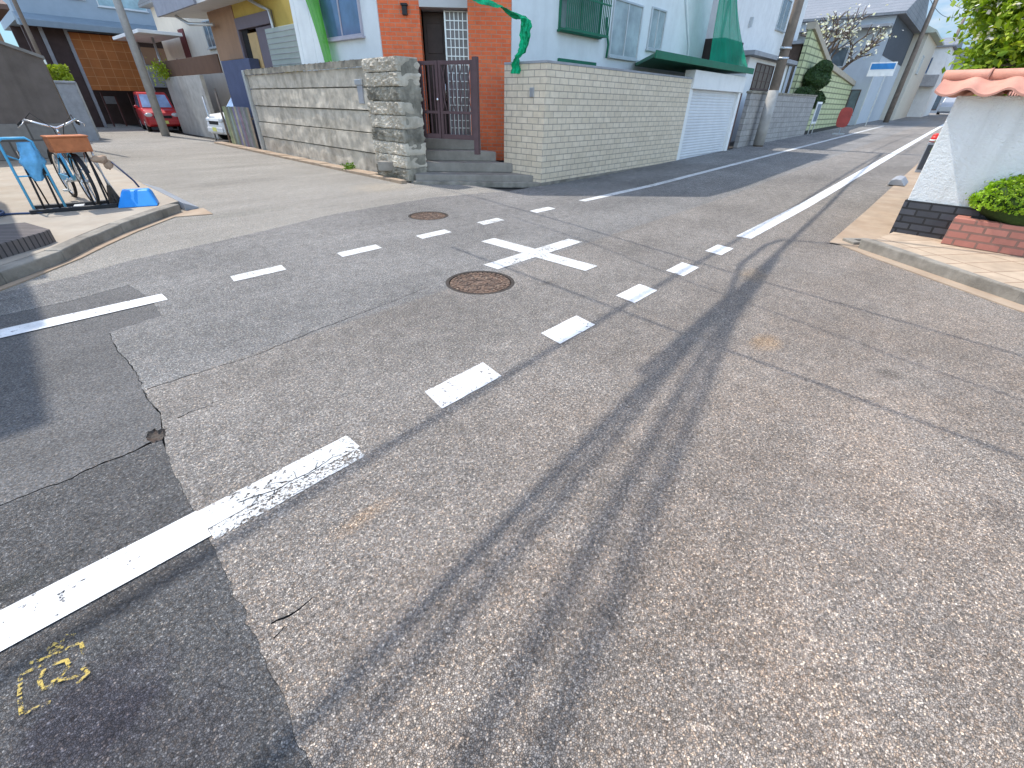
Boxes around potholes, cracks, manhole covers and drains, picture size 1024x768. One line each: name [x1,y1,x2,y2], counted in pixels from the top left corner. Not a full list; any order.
manhole cover [408,211,448,220]
manhole cover [445,271,515,295]
pothole [146,429,166,443]
crack [0,451,135,506]
crack [271,598,312,638]
